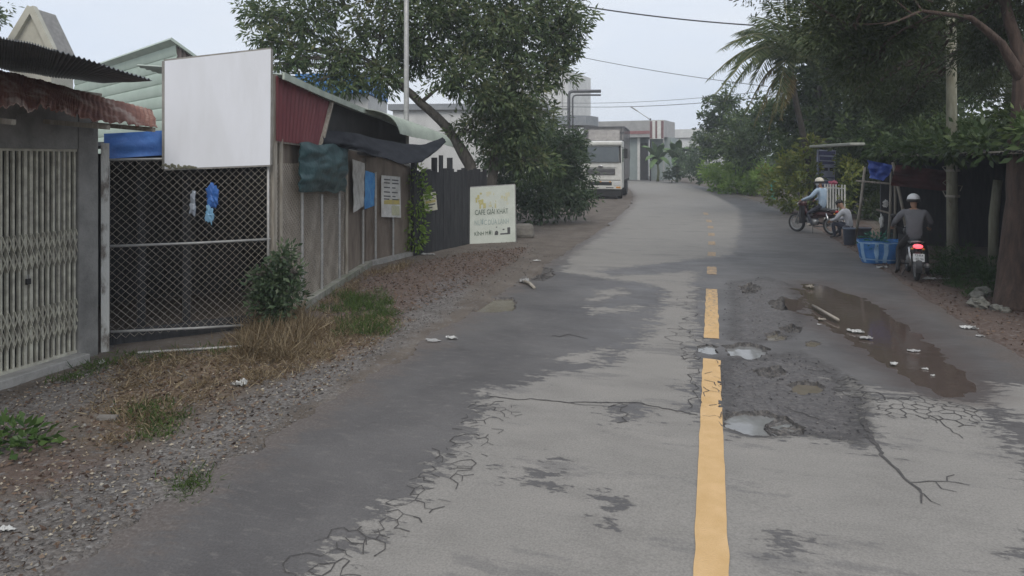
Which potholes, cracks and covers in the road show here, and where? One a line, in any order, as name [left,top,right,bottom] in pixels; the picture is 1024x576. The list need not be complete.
pothole [765,330,790,341]
pothole [722,410,806,436]
pothole [751,365,788,378]
pothole [738,282,762,294]
pothole [696,344,719,355]
pothole [779,323,802,333]
crack [282,296,725,576]
pothole [721,342,771,360]
crack [785,369,983,505]
pothole [768,296,806,311]
pothole [787,380,826,395]
